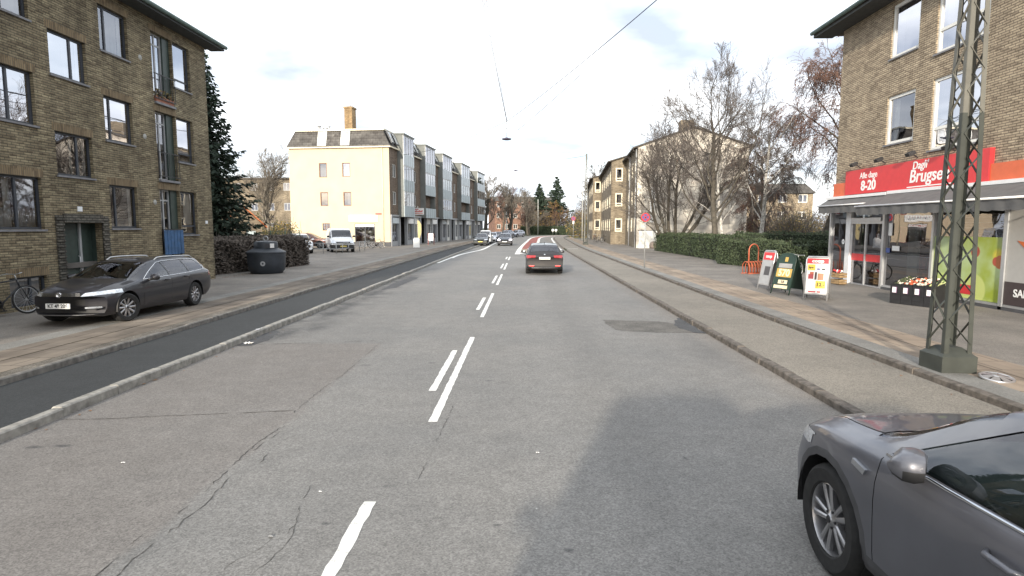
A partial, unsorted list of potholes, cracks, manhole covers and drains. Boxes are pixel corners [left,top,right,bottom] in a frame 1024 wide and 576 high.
crack [95,354,367,576]
